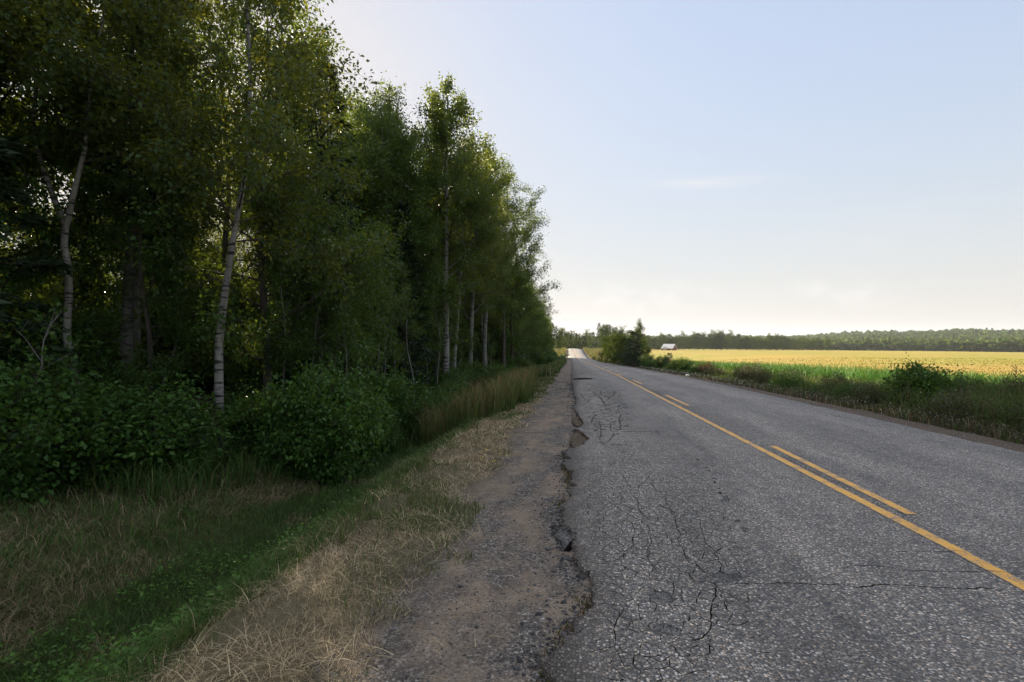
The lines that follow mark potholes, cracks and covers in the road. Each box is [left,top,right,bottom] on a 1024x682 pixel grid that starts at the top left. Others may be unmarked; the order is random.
crack [570,444,1021,682]
pothole [569,429,590,448]
pothole [555,526,577,549]
crack [580,383,649,446]
